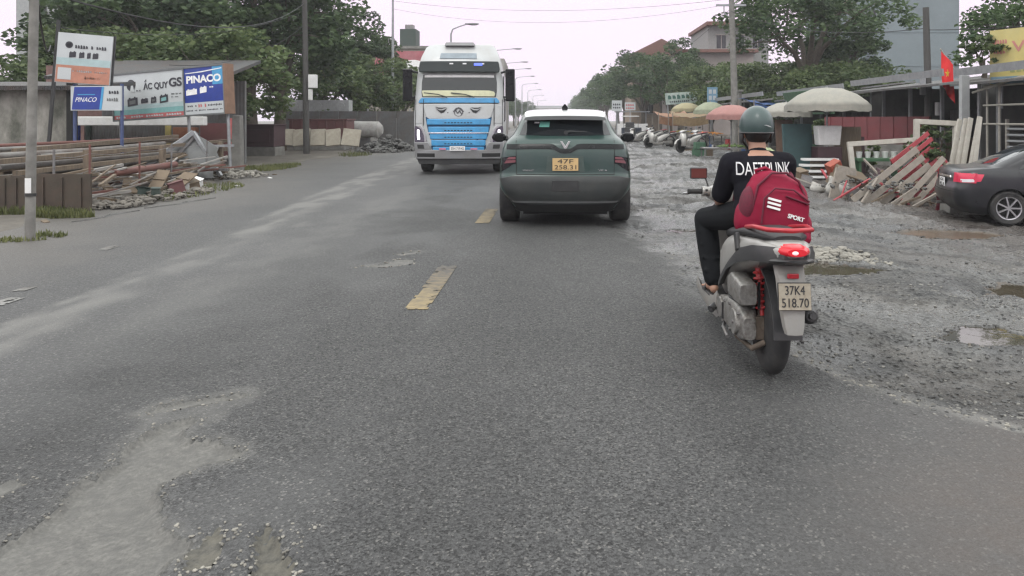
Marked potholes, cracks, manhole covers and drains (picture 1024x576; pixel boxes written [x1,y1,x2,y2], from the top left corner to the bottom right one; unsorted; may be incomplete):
pothole [983,281,1024,299]
pothole [890,228,1012,240]
pothole [940,323,1024,346]
pothole [0,416,249,576]
pothole [803,259,892,277]
